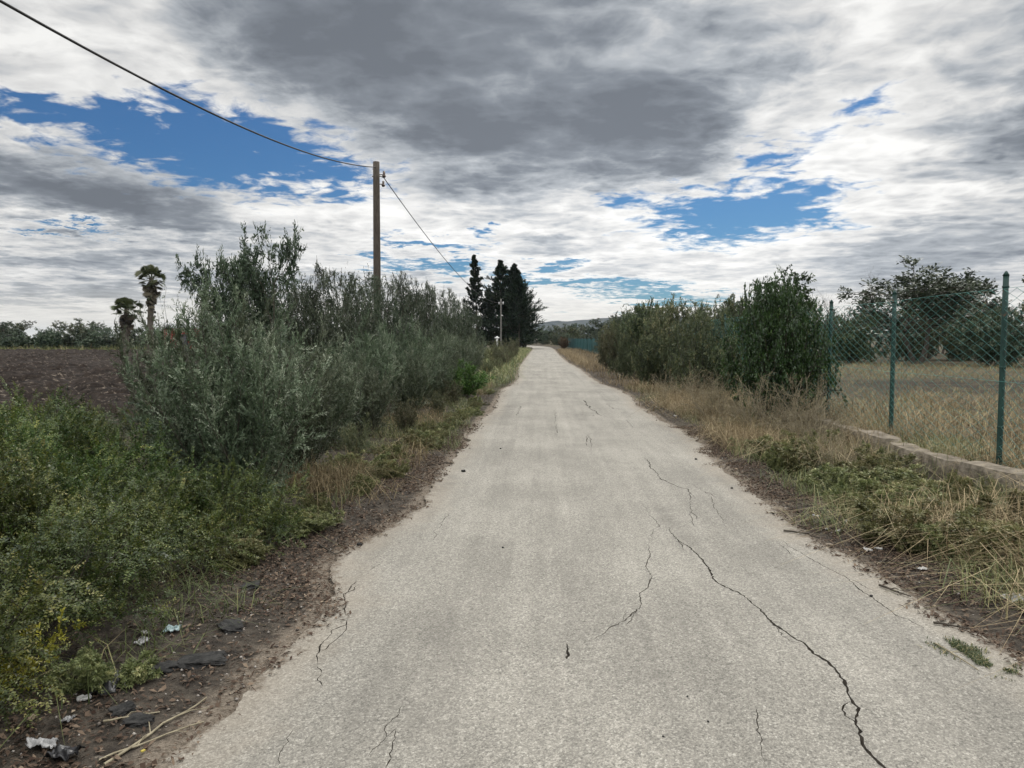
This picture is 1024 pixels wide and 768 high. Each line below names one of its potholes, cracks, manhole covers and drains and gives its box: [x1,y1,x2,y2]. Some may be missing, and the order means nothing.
crack [583,460,886,768]
crack [773,545,918,625]
crack [316,564,380,686]
crack [368,707,401,767]
